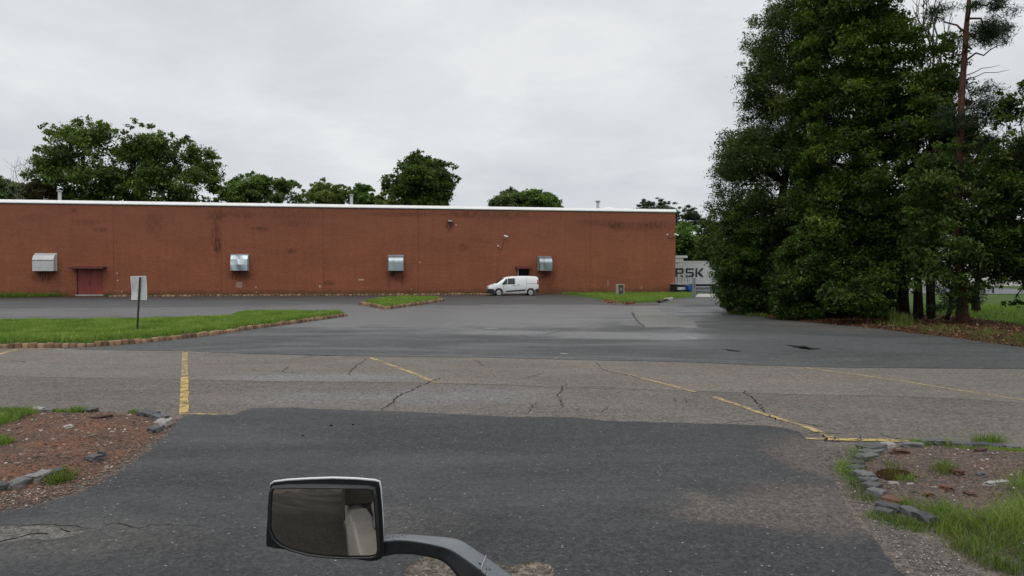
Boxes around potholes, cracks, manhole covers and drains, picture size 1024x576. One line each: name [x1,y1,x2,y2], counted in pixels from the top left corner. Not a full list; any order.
crack [0,523,249,557]
crack [528,384,582,413]
crack [381,378,440,411]
